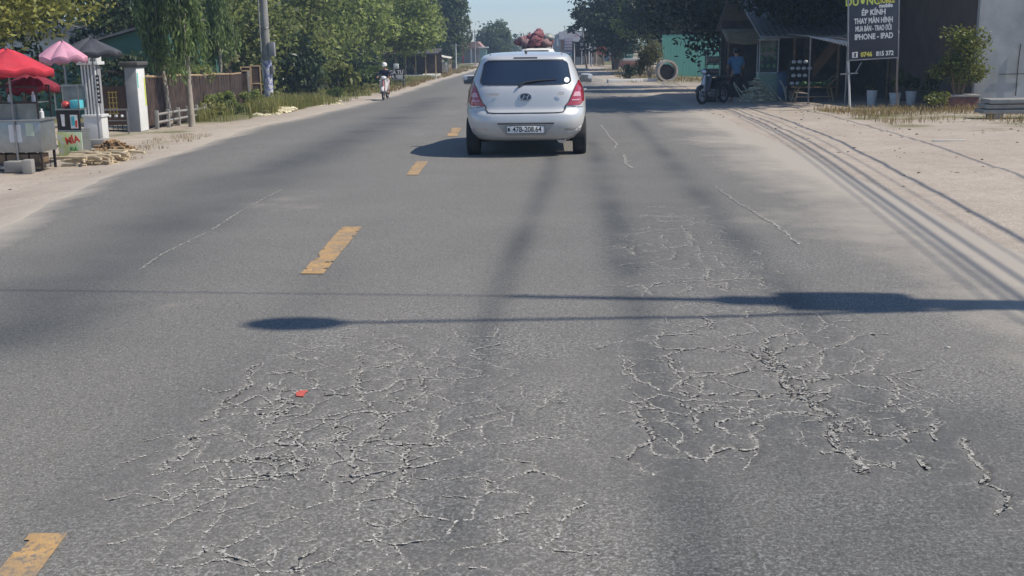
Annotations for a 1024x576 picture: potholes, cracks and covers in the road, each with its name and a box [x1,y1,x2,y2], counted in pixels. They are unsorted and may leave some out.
crack [594,213,784,297]
crack [716,186,801,244]
crack [960,438,1013,516]
crack [105,314,598,576]
crack [596,302,960,475]
crack [601,125,632,168]
